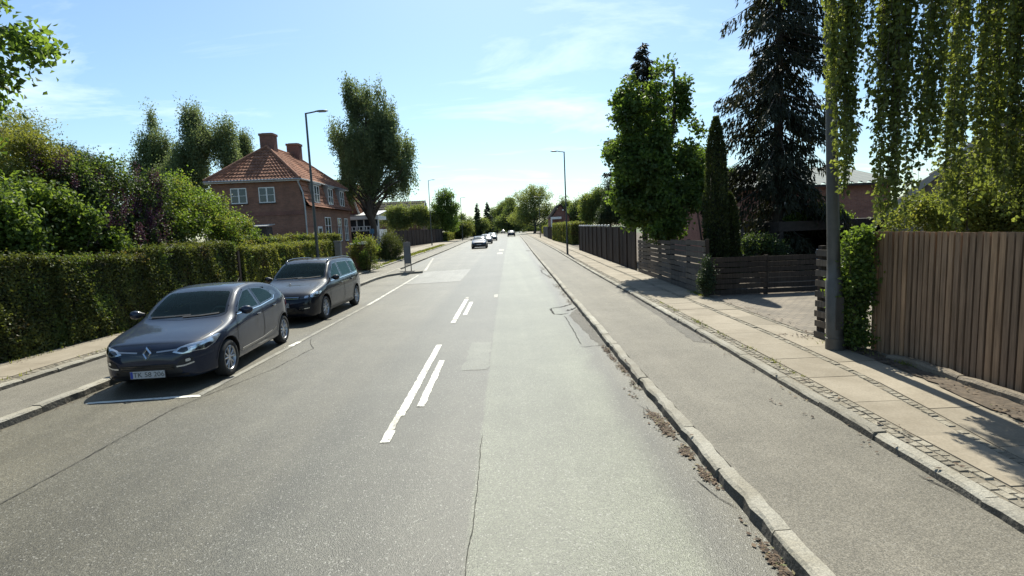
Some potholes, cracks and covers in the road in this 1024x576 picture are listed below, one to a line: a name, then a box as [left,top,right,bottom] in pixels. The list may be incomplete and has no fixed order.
crack [550,304,599,347]
